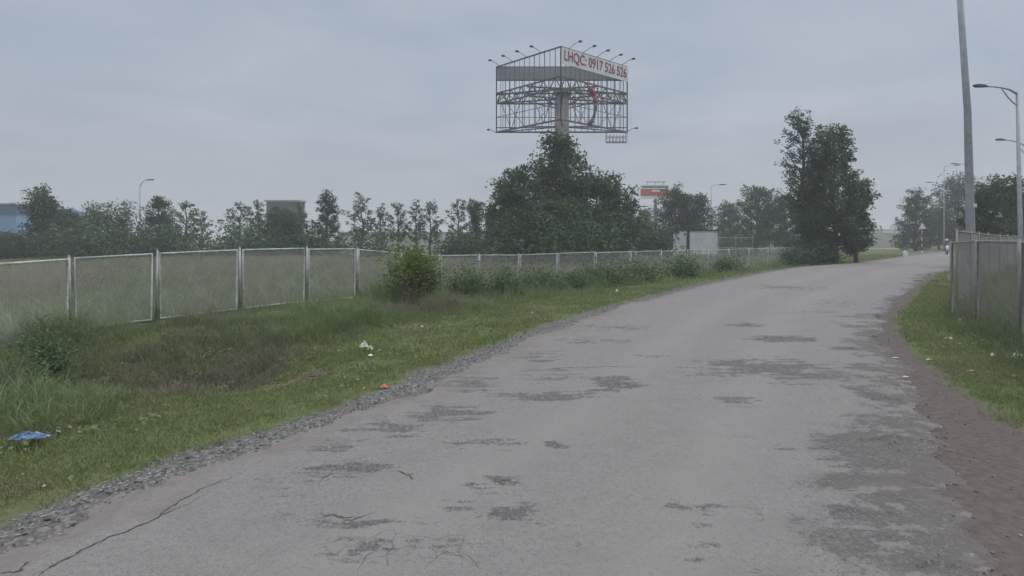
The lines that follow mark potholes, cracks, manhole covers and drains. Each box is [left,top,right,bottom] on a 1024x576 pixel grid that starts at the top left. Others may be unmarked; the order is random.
pothole [855,434,955,458]
pothole [824,506,894,519]
pothole [606,382,638,390]
crack [1,476,232,575]
crack [306,512,490,567]
